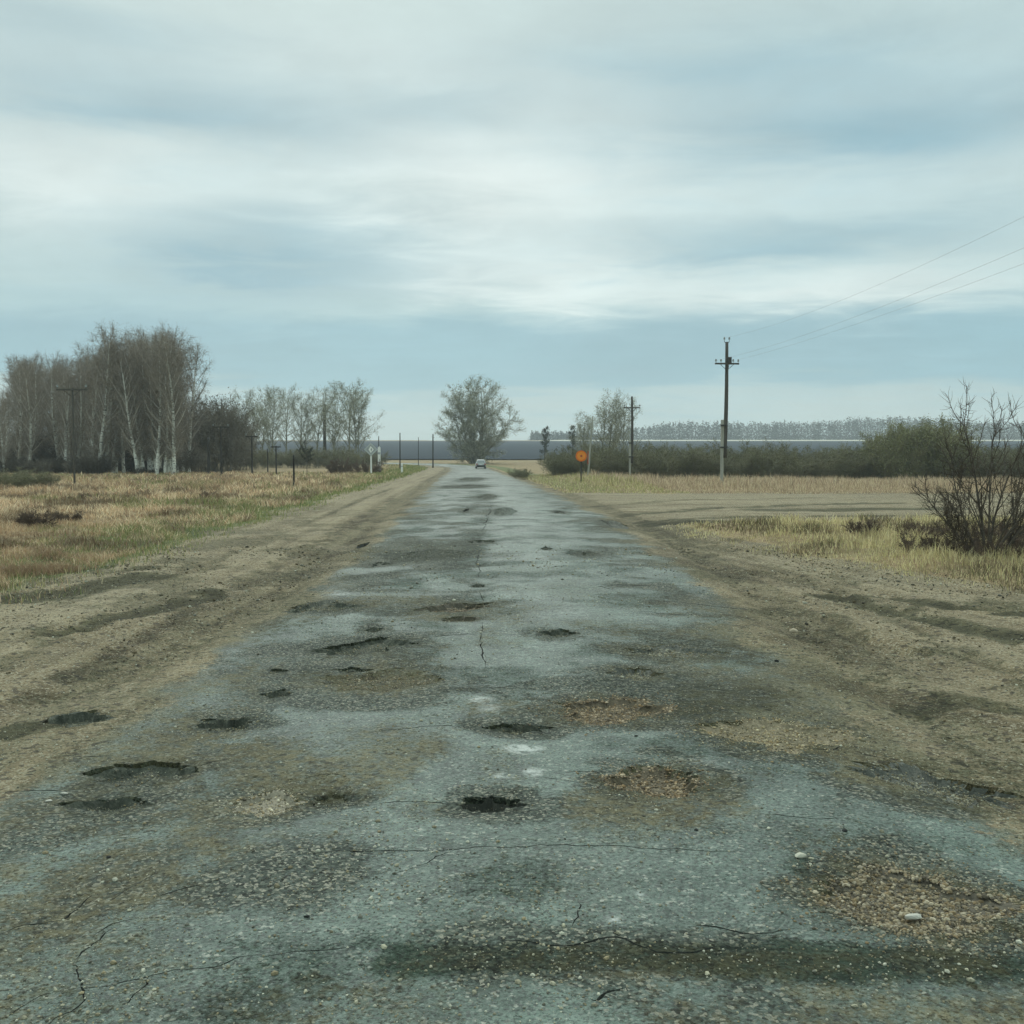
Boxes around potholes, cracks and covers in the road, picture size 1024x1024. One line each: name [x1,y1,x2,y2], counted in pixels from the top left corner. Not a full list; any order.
pothole [552,755,737,807]
crack [0,868,252,1024]
pothole [523,687,723,735]
crack [133,844,756,905]
pothole [190,716,255,733]
pothole [752,839,1024,959]
pothole [306,637,418,656]
pothole [480,723,554,735]
pothole [413,602,493,613]
pothole [458,796,530,813]
pothole [260,689,292,699]
pothole [57,797,155,812]
